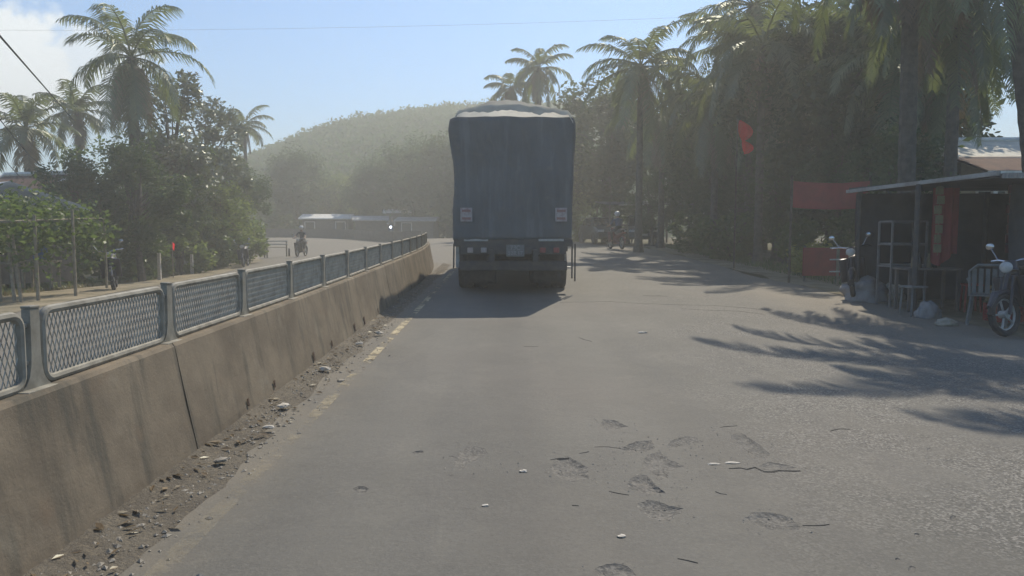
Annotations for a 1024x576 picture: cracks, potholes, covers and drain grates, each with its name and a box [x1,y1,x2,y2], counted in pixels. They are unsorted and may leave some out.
pothole [621,441,655,452]
pothole [667,436,703,447]
pothole [642,452,683,481]
pothole [454,445,488,470]
pothole [551,456,589,482]
pothole [637,500,683,521]
pothole [595,563,636,576]
pothole [745,512,800,530]
pothole [627,474,666,495]
pothole [601,420,628,429]
pothole [731,433,770,460]
